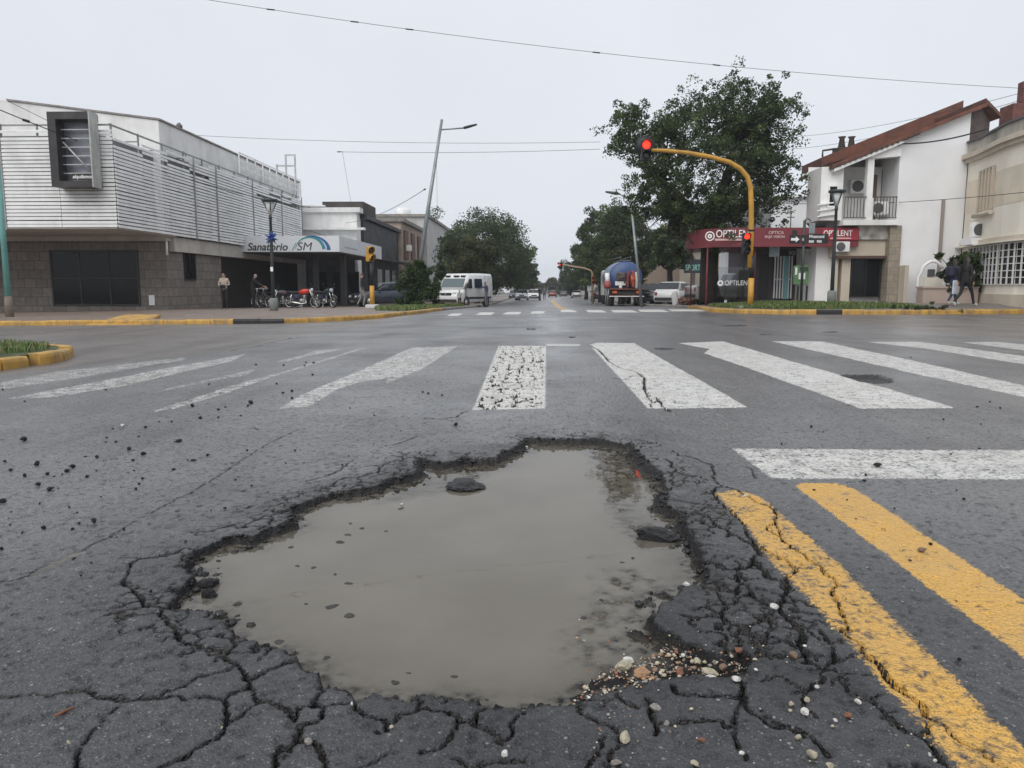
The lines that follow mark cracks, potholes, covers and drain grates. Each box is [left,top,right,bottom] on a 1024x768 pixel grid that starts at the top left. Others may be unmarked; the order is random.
pothole [169,437,756,709]
crack [0,432,1009,768]
crack [591,346,676,412]
